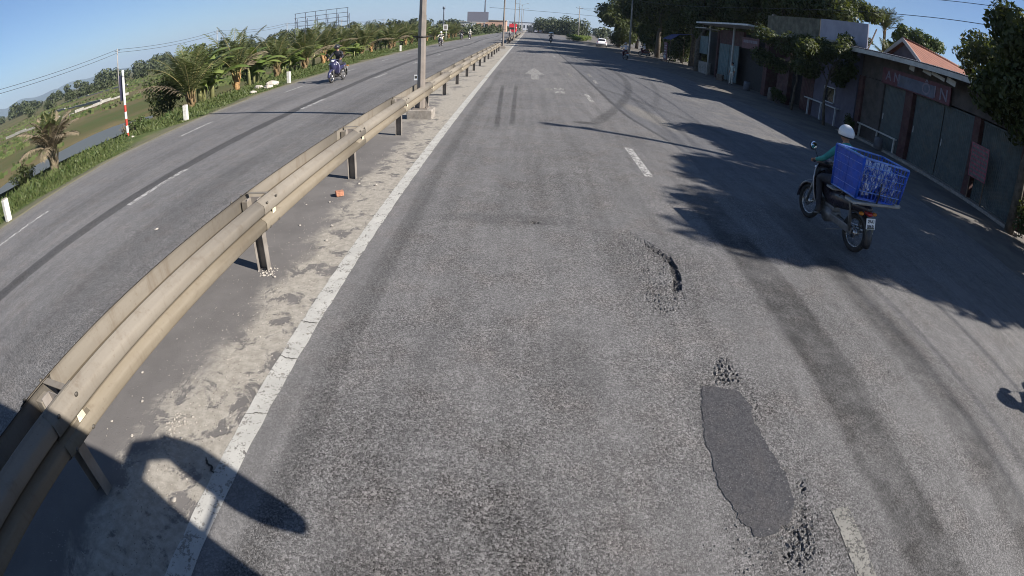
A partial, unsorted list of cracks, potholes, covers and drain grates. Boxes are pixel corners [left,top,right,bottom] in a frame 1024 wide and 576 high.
pothole [611,227,690,317]
pothole [774,448,819,574]
